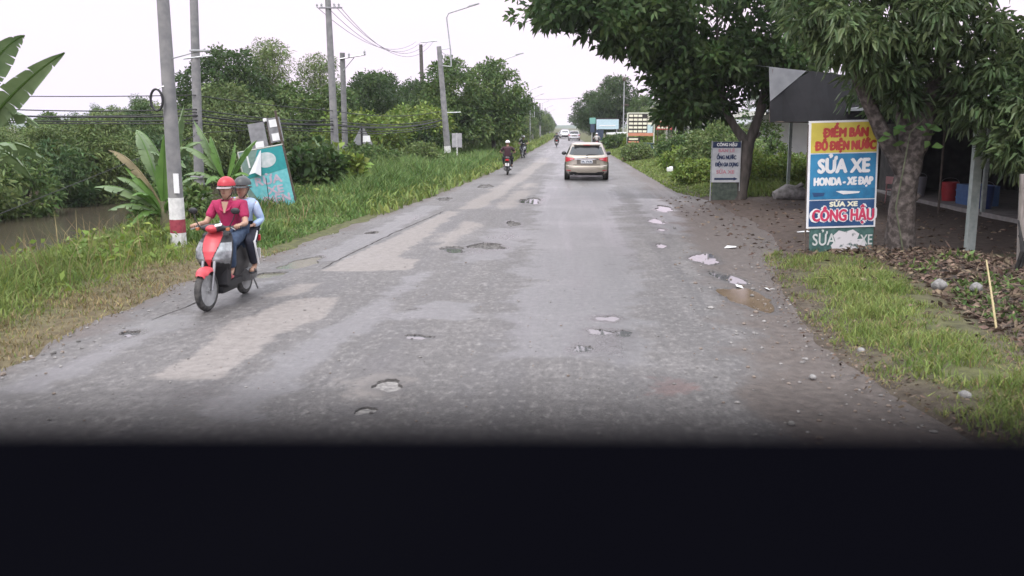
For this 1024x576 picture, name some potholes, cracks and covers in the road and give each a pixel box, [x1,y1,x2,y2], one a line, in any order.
pothole [371,379,403,392]
pothole [467,242,506,250]
pothole [714,287,775,313]
